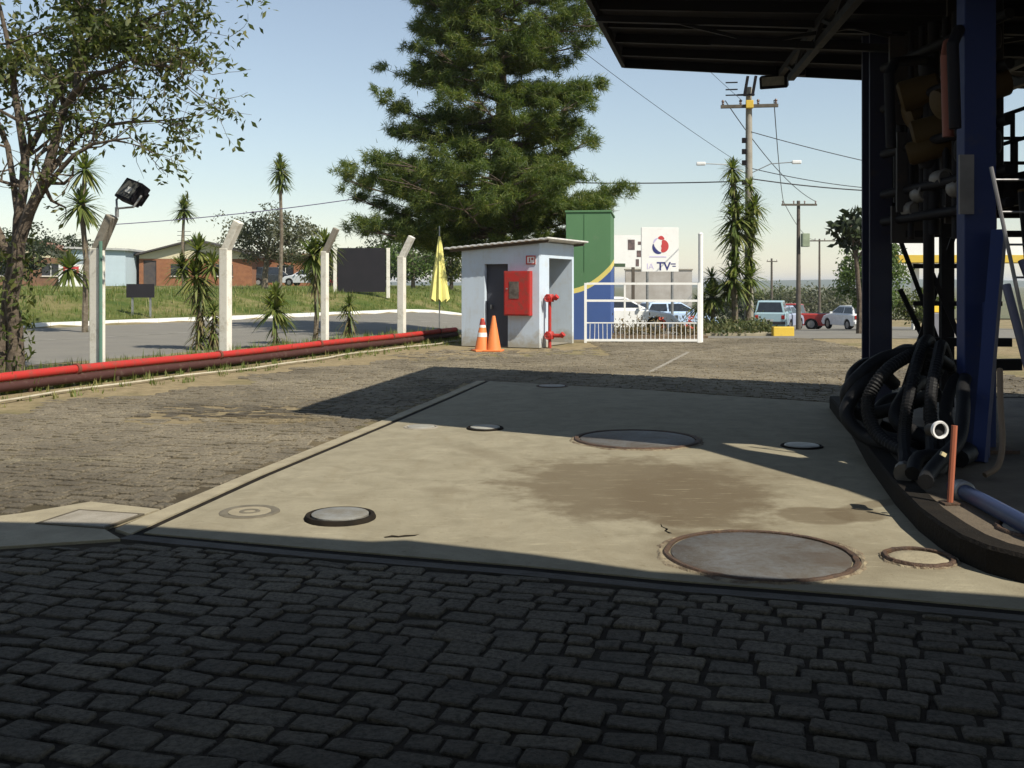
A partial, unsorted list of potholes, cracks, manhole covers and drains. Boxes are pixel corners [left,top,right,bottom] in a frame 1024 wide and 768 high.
manhole cover [780,442,824,450]
manhole cover [878,546,961,569]
manhole cover [466,424,504,432]
manhole cover [569,429,704,451]
manhole cover [304,506,376,527]
manhole cover [219,505,280,519]
manhole cover [657,529,868,585]
utility cover [35,509,145,529]
